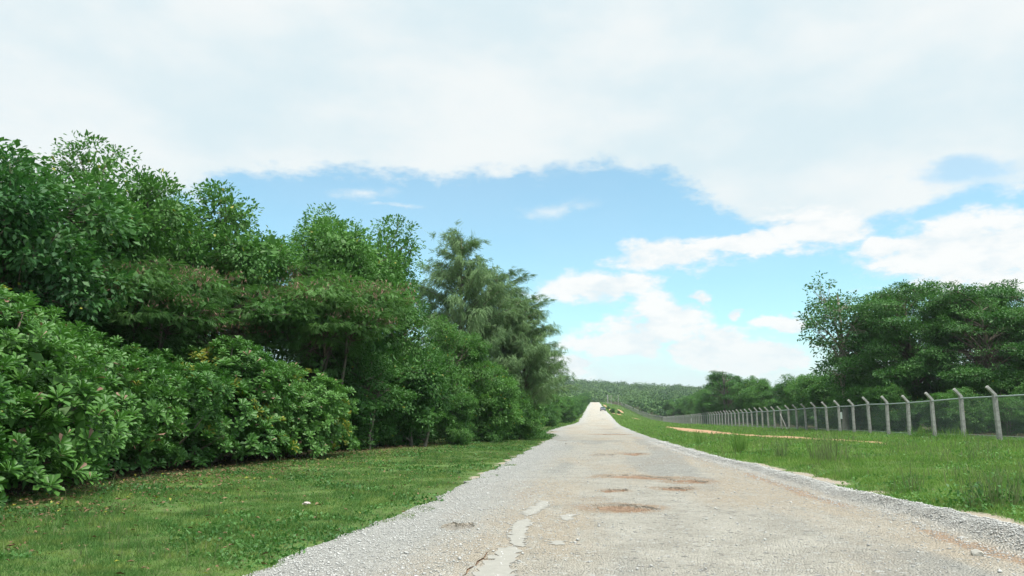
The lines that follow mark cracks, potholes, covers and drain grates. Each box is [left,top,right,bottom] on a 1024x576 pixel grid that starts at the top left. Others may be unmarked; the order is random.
pothole [590,504,660,512]
pothole [439,522,475,531]
crack [463,549,492,576]
